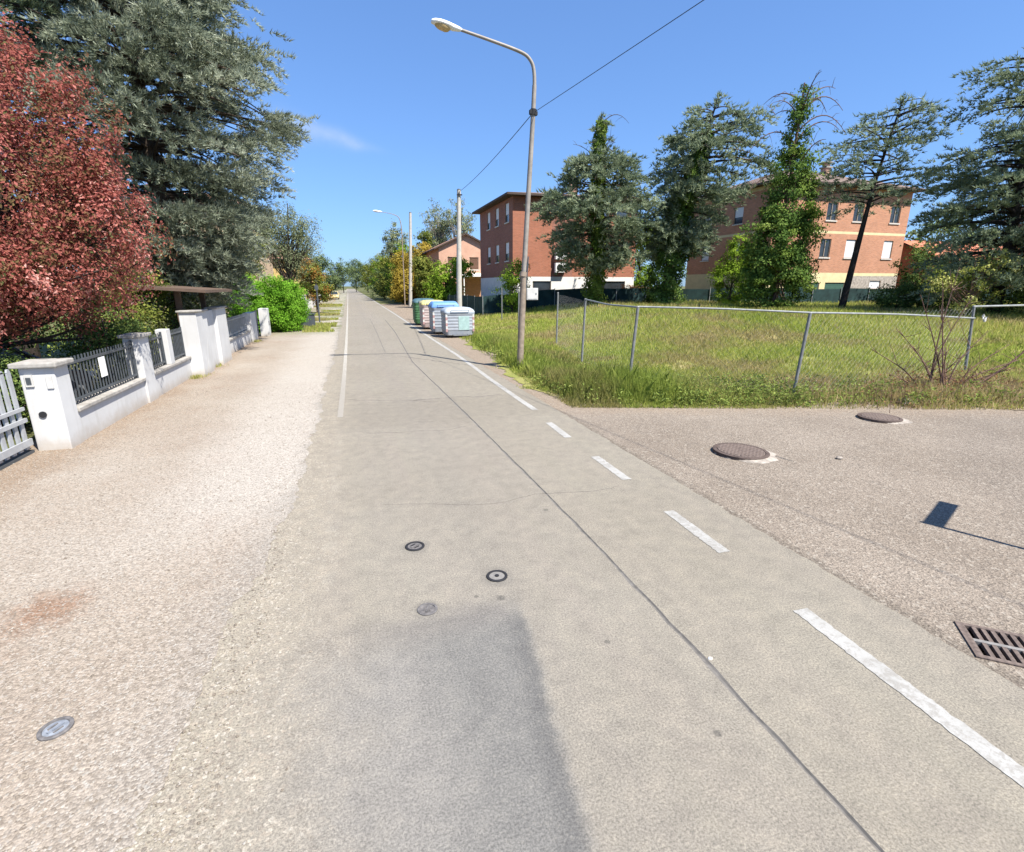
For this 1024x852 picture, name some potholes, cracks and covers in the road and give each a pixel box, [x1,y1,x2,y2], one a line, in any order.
utility cover [405,541,425,551]
utility cover [417,603,438,616]
manhole cover [712,443,778,464]
manhole cover [857,412,913,424]
utility cover [486,570,508,582]
crack [386,486,616,505]
drain grate [954,621,1024,668]
utility cover [36,716,75,742]
